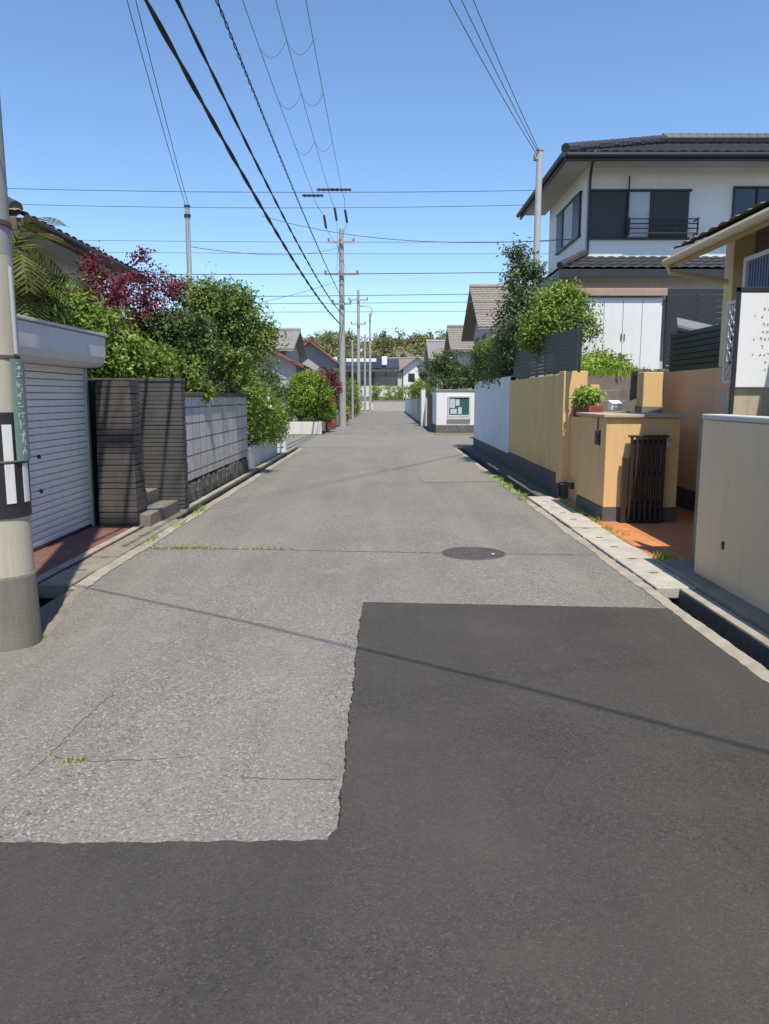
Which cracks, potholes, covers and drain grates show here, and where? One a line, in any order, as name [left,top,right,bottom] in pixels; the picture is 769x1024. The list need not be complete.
manhole cover [441,547,506,560]
crack [29,692,200,773]
